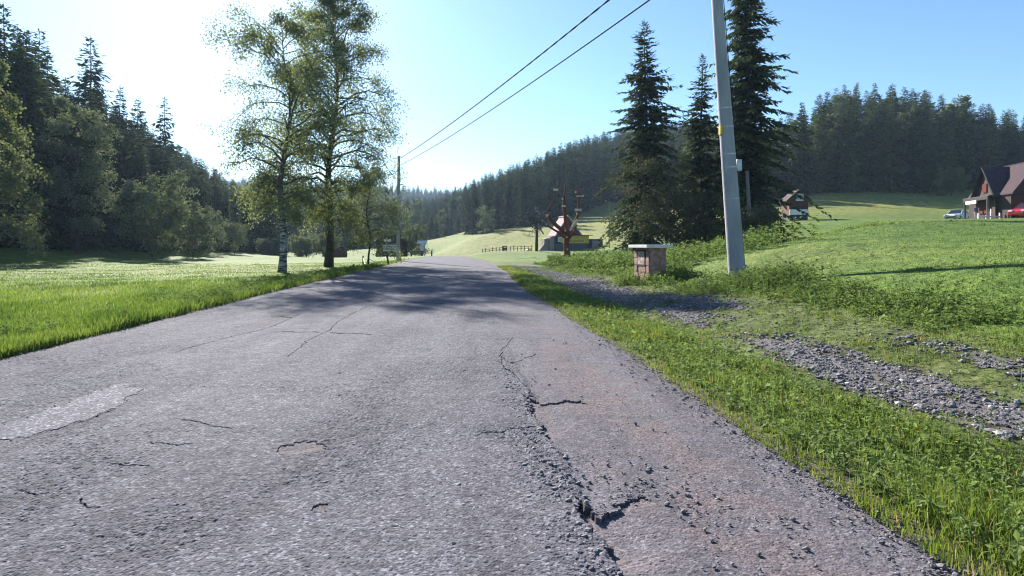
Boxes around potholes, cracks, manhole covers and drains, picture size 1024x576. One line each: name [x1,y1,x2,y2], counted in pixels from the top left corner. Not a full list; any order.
crack [180,292,383,356]
crack [499,337,536,387]
crack [475,425,539,436]
pothole [276,440,326,454]
